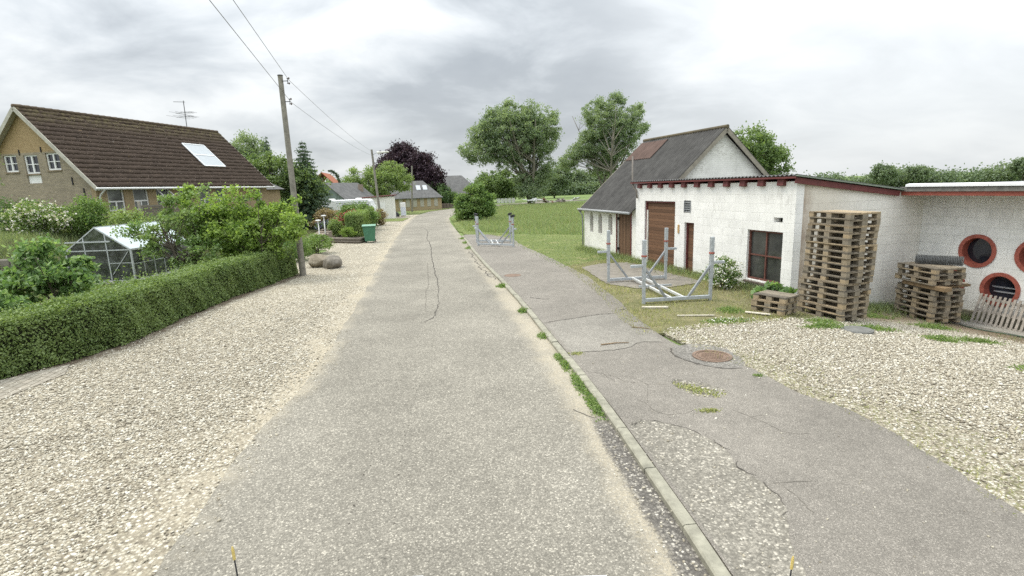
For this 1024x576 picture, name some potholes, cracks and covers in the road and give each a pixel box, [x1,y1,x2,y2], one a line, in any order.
manhole cover [692,350,733,363]
crack [589,371,816,520]
crack [424,229,440,322]
